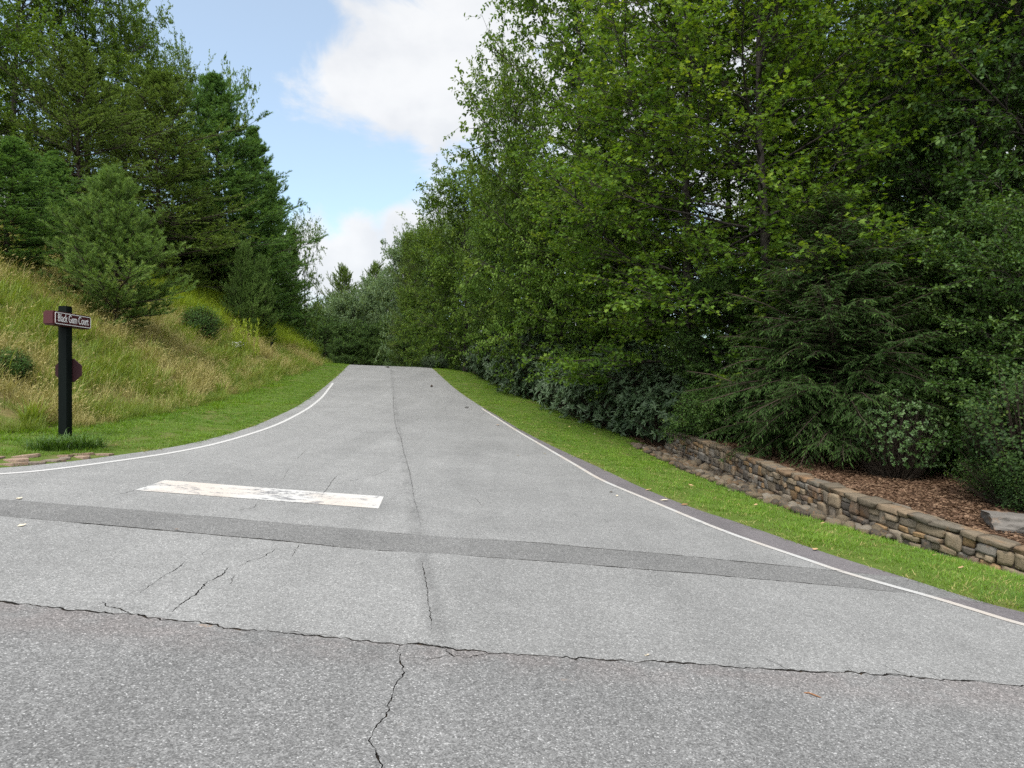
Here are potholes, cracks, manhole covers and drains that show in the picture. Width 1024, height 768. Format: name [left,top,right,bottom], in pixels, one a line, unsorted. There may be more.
crack [0,547,1024,768]
